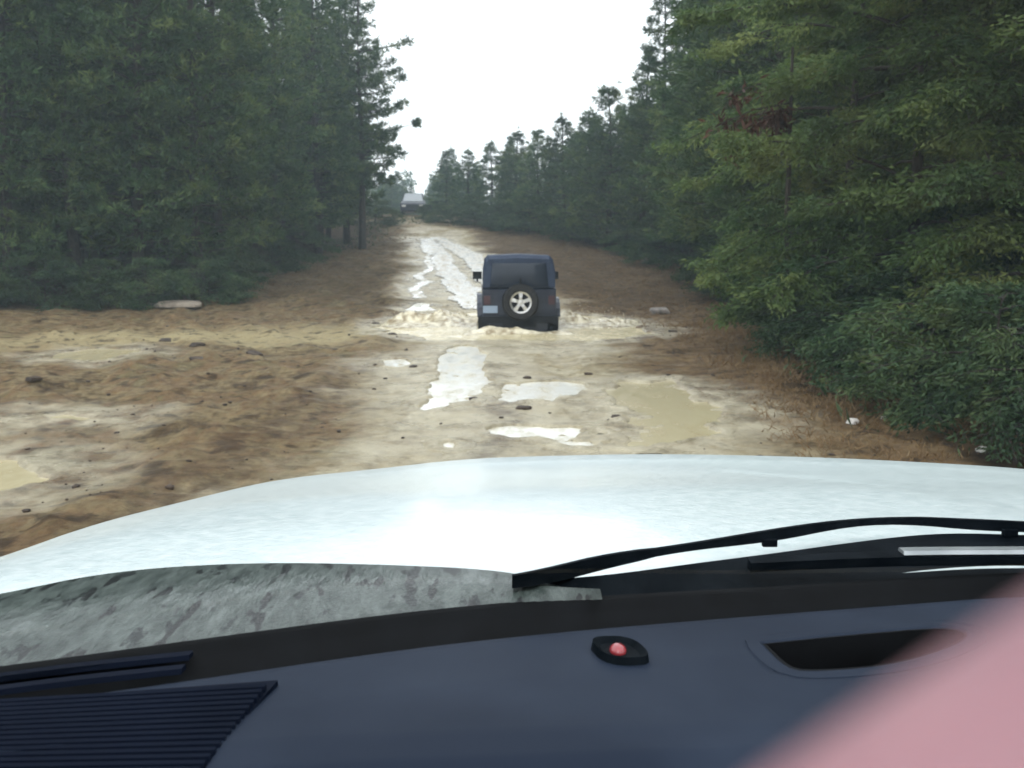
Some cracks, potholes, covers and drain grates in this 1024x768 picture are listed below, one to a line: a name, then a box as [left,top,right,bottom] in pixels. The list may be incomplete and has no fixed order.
pothole [471,422,631,452]
pothole [481,379,606,407]
